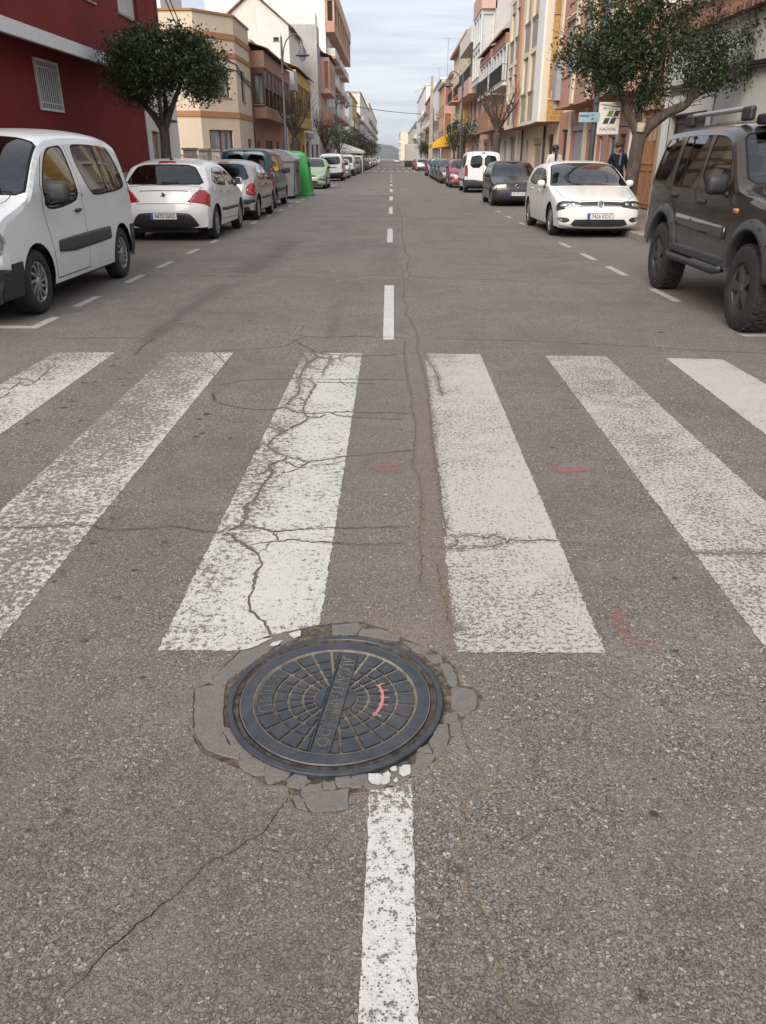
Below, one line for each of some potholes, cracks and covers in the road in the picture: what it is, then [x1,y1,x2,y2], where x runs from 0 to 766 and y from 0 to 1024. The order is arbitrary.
manhole cover [227,636,443,780]
